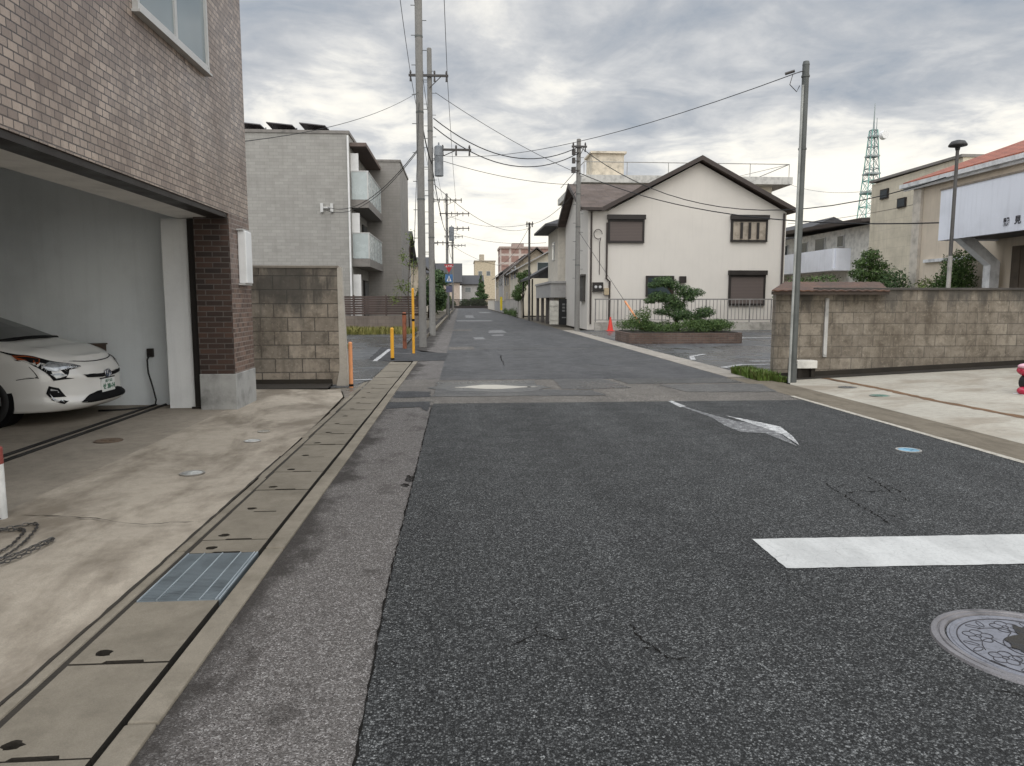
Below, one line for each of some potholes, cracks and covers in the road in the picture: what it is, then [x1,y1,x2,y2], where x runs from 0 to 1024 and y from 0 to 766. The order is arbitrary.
drain grate [136,551,259,606]
crack [505,626,571,646]
crack [826,477,909,522]
crack [45,515,196,524]
manhole cover [929,609,1024,685]
crack [630,624,687,659]
